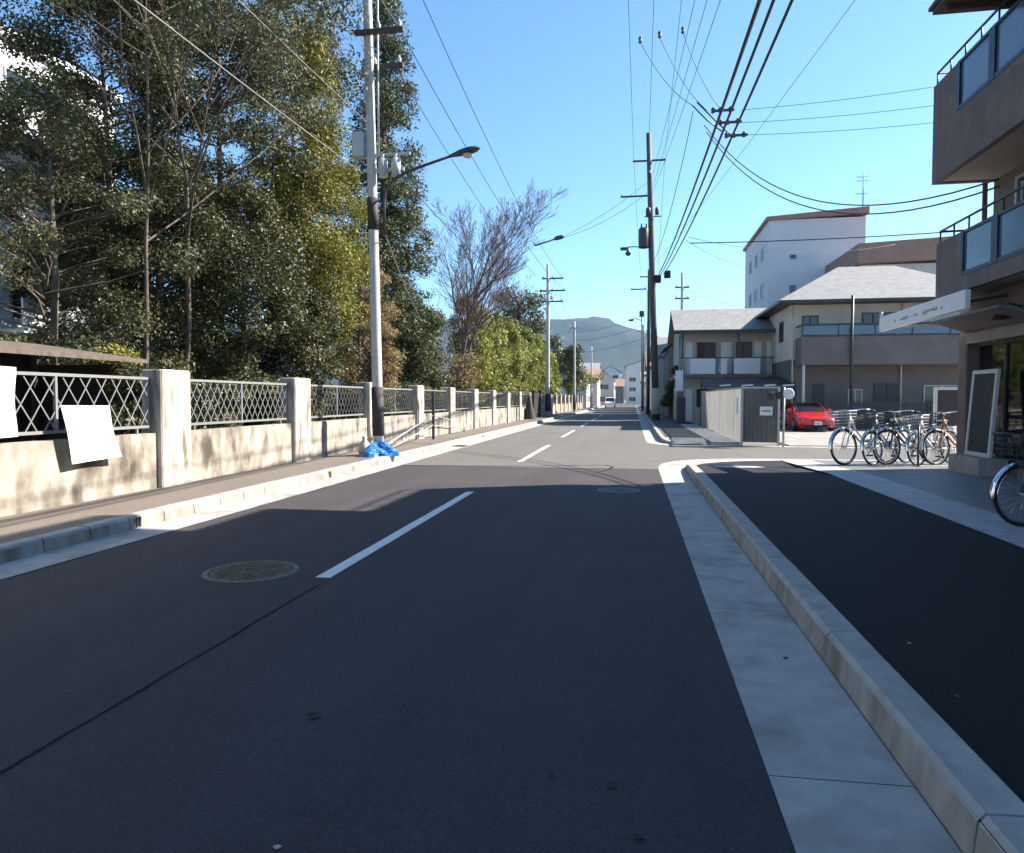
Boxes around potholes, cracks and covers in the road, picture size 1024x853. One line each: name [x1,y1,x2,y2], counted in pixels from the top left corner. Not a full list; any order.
manhole cover [202,560,299,583]
